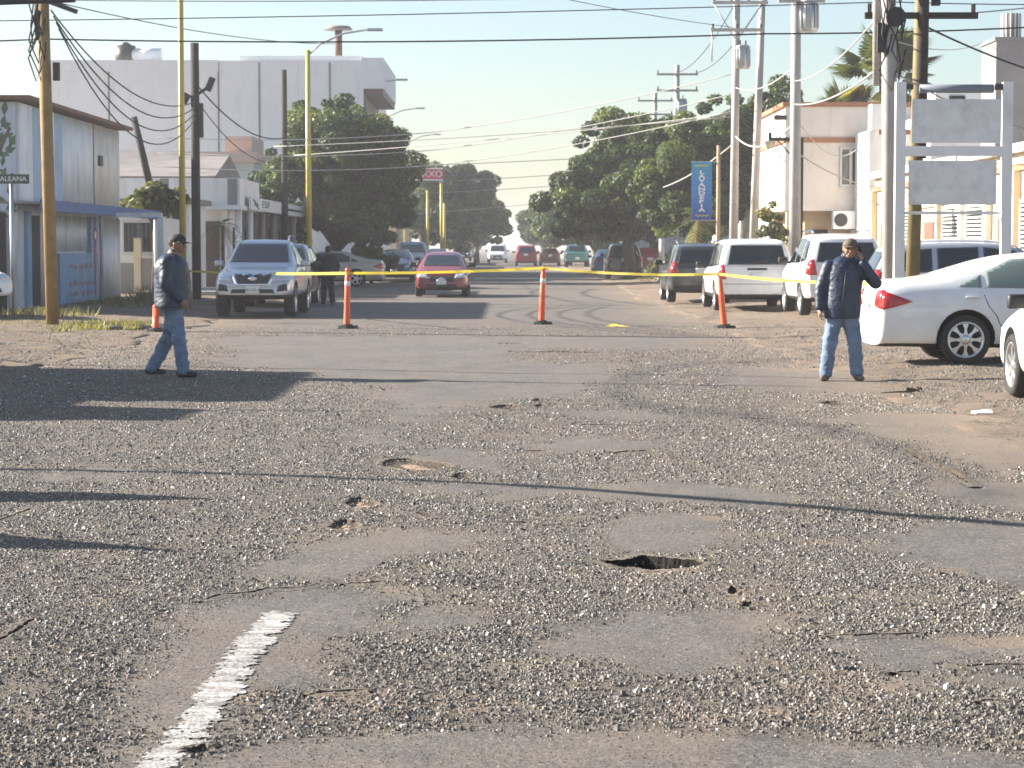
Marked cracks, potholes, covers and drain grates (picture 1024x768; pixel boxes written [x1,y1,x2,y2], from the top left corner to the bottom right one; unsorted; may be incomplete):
pothole [335,496,385,509]
crack [883,444,983,488]
pothole [585,553,716,573]
crack [192,584,323,603]
pothole [319,518,368,532]
crack [294,687,370,699]
pothole [371,457,461,472]
crack [822,631,924,640]
crack [0,618,47,643]
